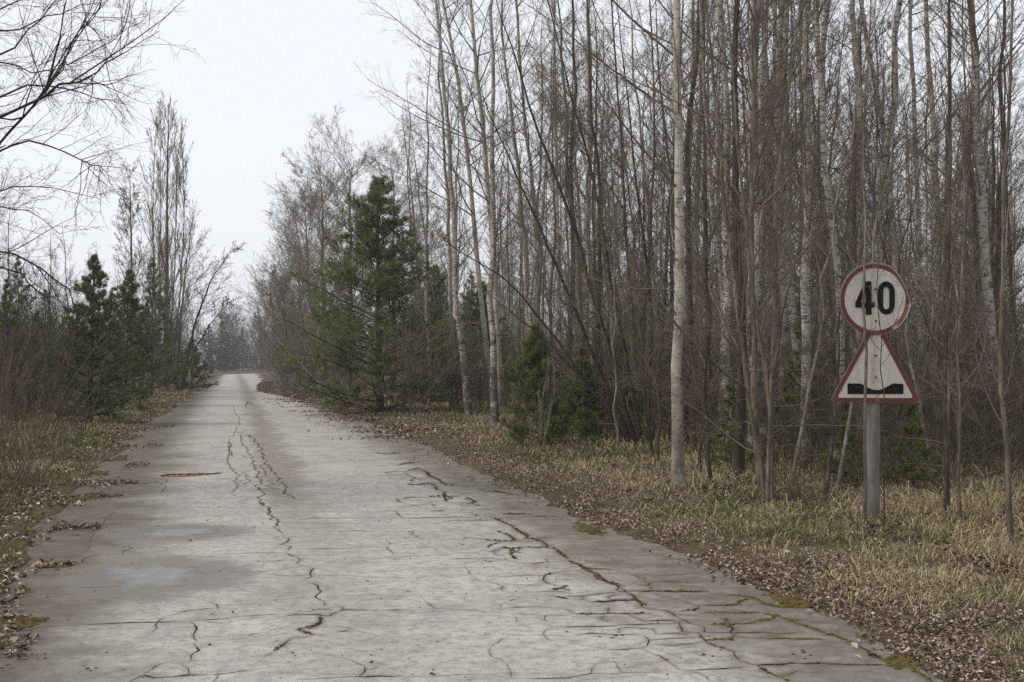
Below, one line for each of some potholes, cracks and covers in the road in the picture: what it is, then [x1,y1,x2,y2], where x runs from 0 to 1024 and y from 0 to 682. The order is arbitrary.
crack [227,402,368,645]
crack [13,606,271,681]
crack [394,468,916,679]
